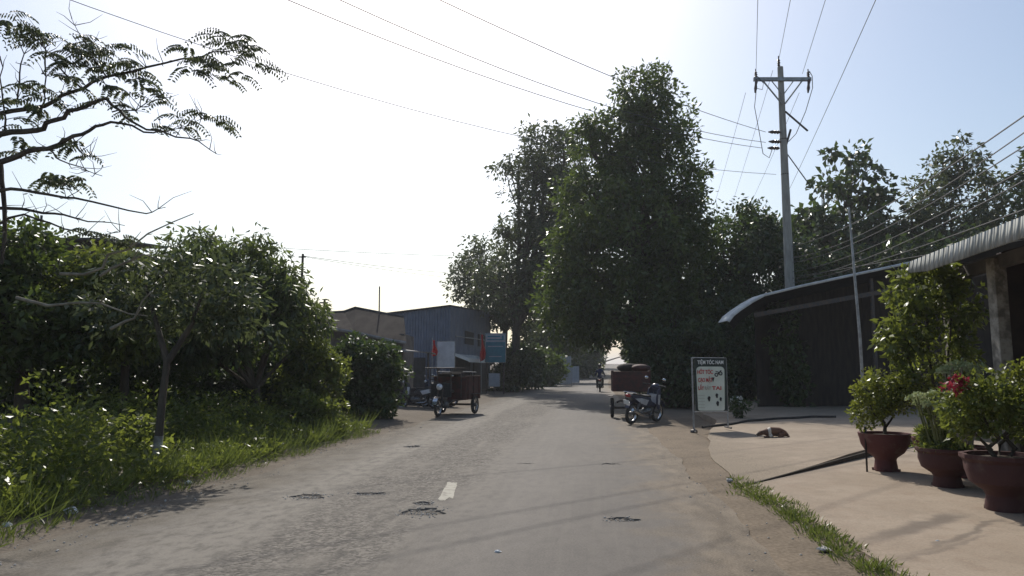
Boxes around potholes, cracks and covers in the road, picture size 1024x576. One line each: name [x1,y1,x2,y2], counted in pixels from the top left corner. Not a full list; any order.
pothole [395,506,452,519]
pothole [283,492,333,500]
